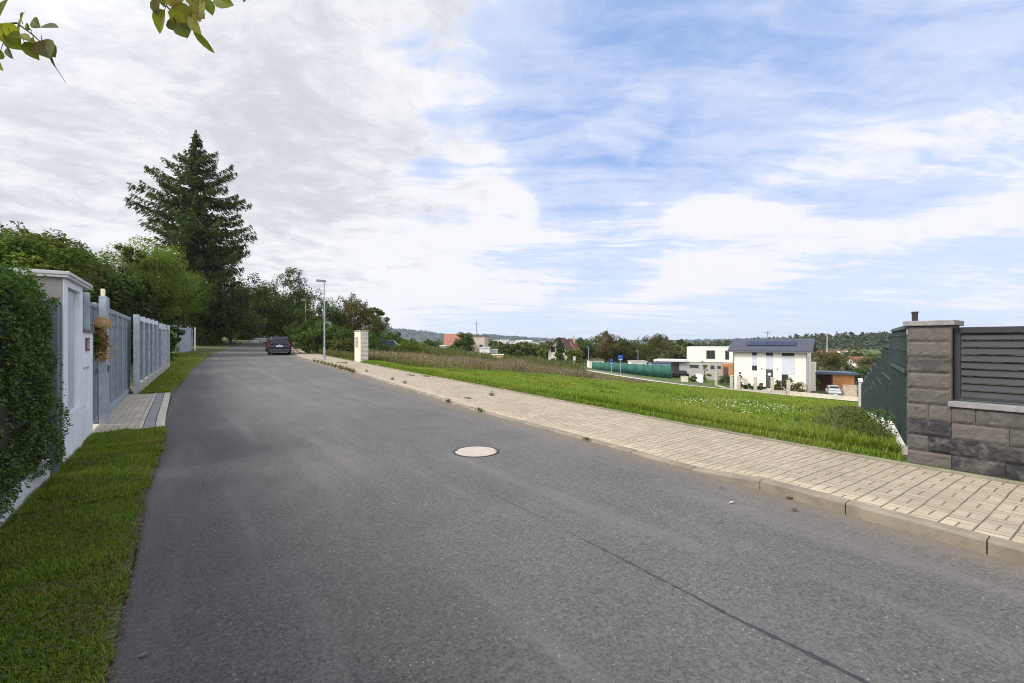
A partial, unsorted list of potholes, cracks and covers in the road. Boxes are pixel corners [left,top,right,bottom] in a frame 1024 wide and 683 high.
manhole cover [453,446,499,457]
